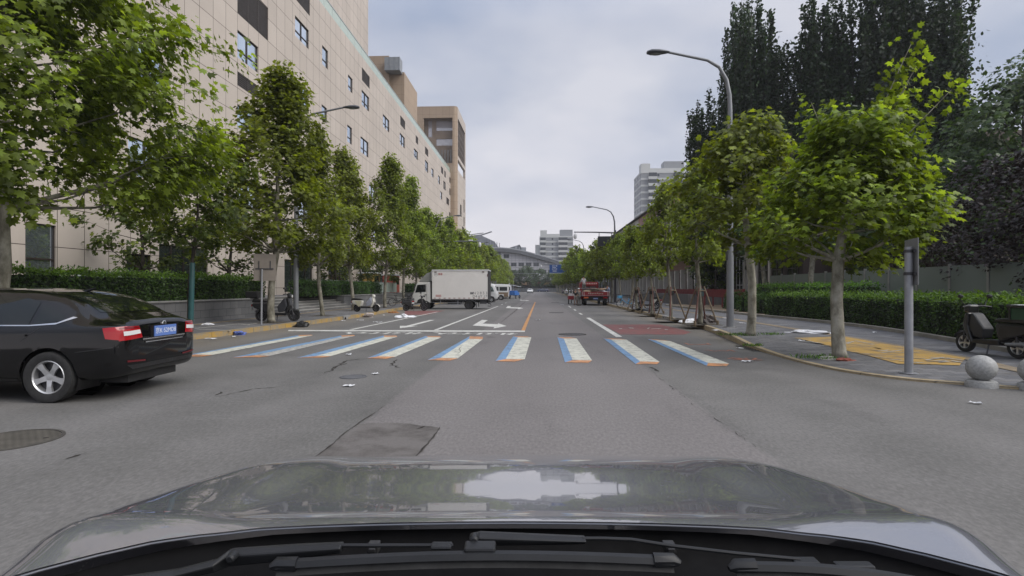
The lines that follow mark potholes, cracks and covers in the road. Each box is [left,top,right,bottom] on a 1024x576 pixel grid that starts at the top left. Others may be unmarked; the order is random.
manhole cover [0,429,66,451]
